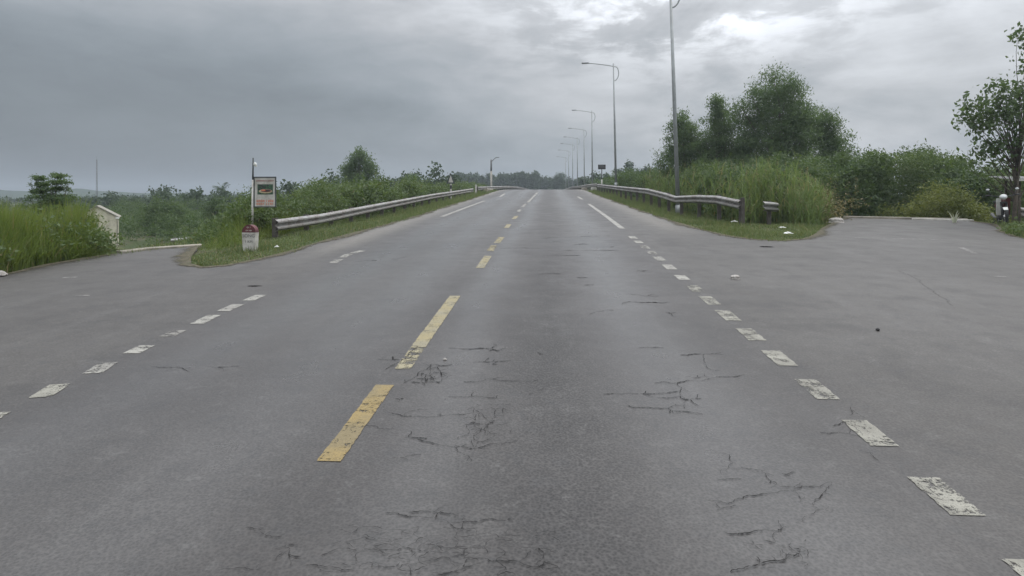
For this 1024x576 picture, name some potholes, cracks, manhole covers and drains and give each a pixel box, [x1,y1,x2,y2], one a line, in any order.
crack [728,520,818,572]
crack [712,452,832,521]
crack [608,353,736,414]
crack [247,507,566,575]
crack [368,345,541,460]
